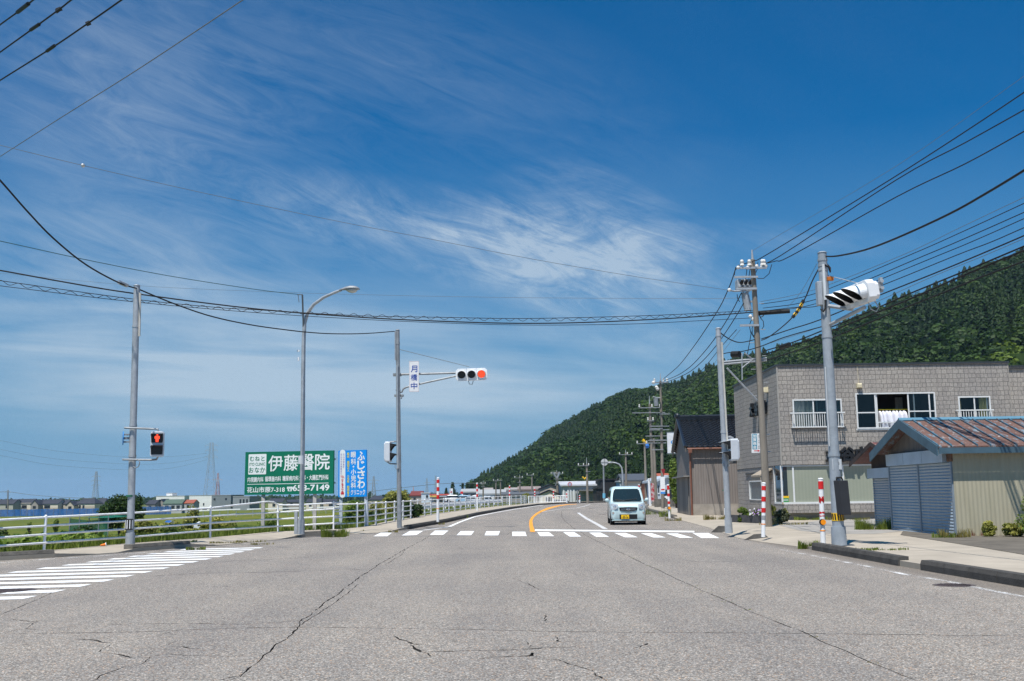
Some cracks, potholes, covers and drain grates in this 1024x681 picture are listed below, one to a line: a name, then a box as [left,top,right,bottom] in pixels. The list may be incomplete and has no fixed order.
crack [5,507,991,681]
